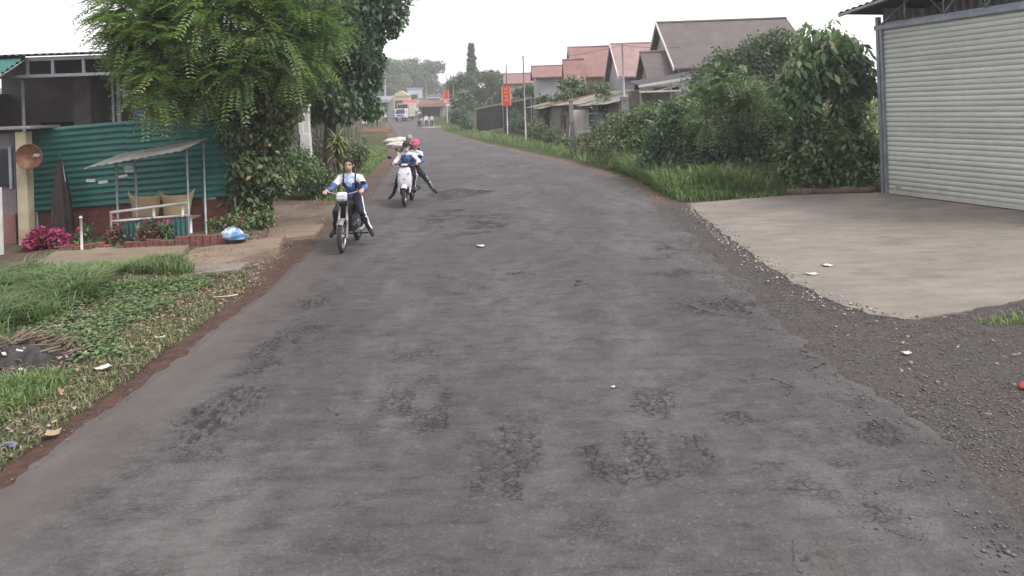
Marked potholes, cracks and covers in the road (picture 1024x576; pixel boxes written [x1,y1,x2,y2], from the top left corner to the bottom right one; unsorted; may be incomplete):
pothole [160,380,273,450]
